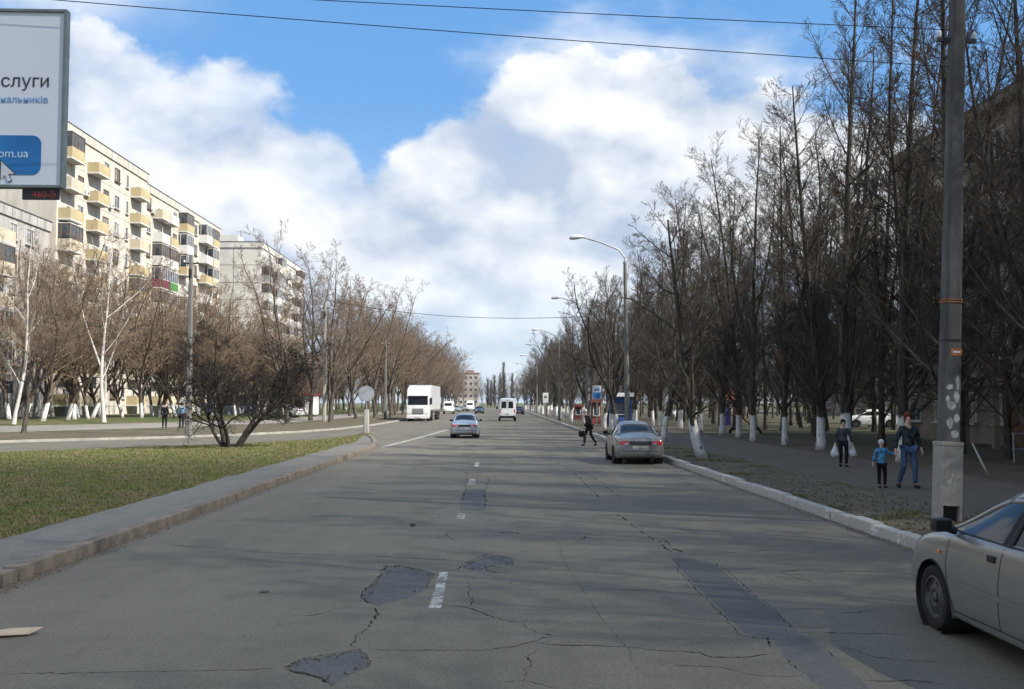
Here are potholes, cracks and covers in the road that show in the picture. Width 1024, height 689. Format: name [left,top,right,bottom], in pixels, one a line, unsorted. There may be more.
crack [17,545,513,686]
crack [403,514,951,688]
